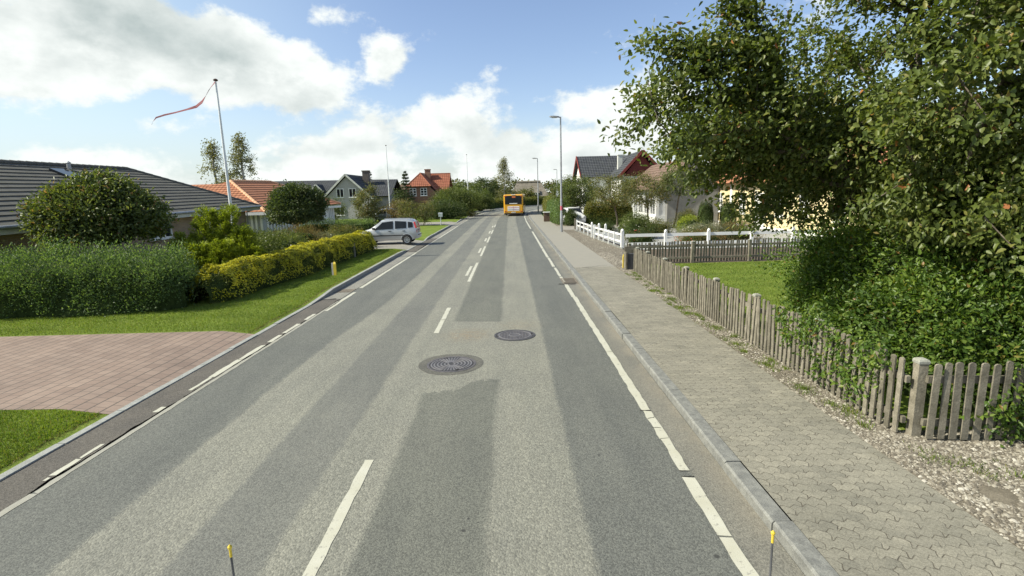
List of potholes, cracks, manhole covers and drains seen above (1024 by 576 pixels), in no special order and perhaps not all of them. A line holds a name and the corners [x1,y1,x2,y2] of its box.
manhole cover [418,354,483,375]
manhole cover [494,330,535,341]
